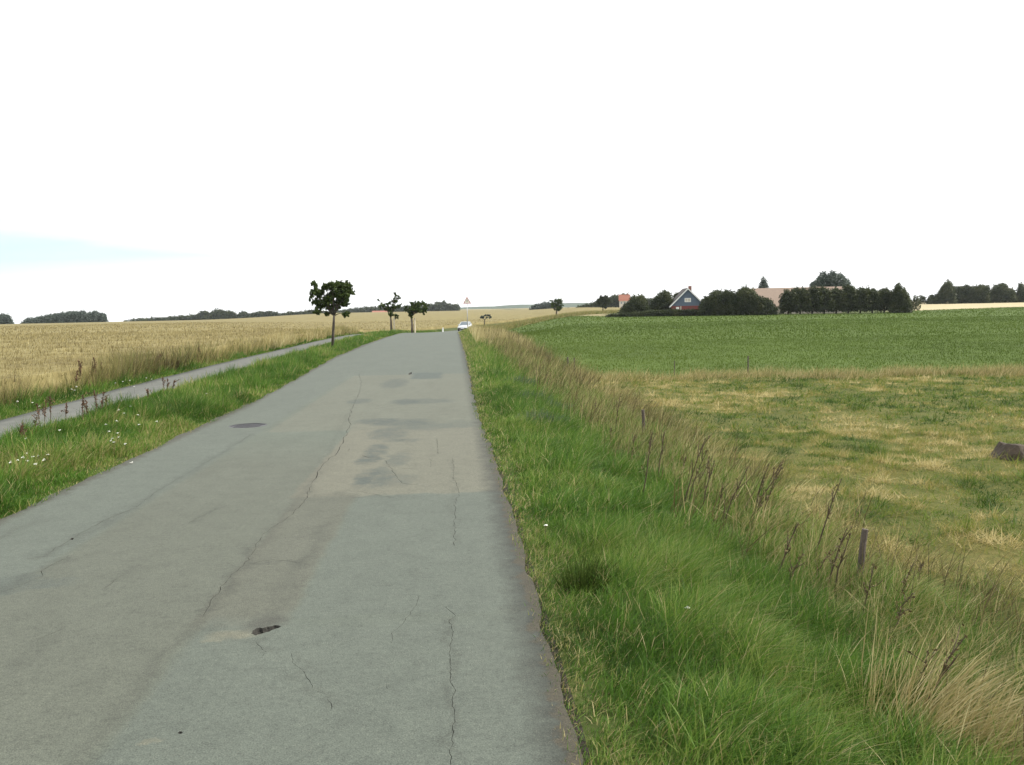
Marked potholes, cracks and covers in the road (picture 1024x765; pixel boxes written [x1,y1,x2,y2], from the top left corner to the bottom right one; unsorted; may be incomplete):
crack [448,609,456,764]
pothole [251,625,281,635]
